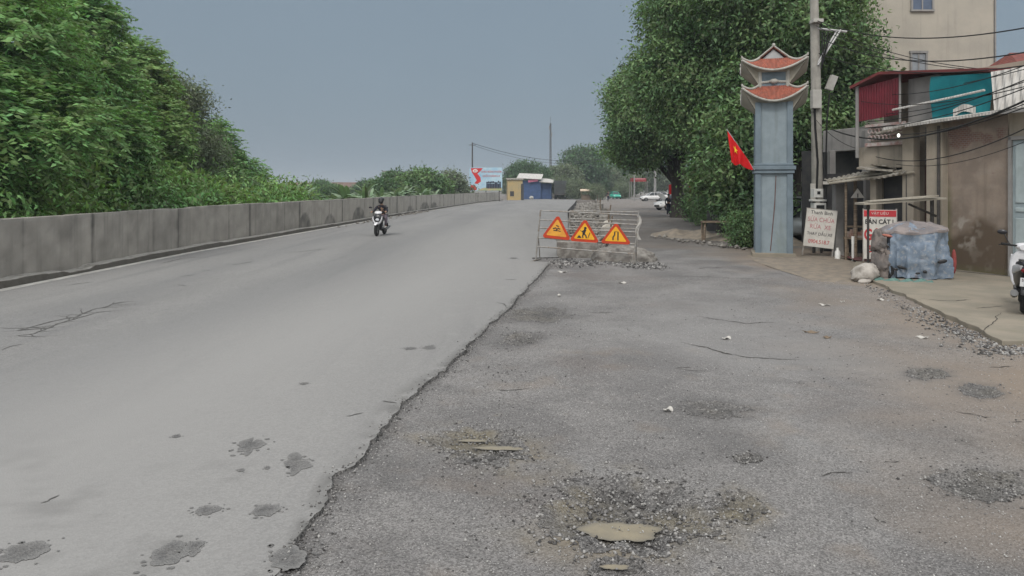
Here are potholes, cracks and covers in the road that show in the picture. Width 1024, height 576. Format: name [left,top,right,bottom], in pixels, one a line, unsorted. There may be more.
pothole [905,368,950,380]
pothole [538,473,722,558]
crack [2,300,134,350]
pothole [958,383,1004,399]
pothole [928,468,1024,502]
pothole [733,452,761,464]
pothole [419,426,532,467]
pothole [587,555,650,576]
